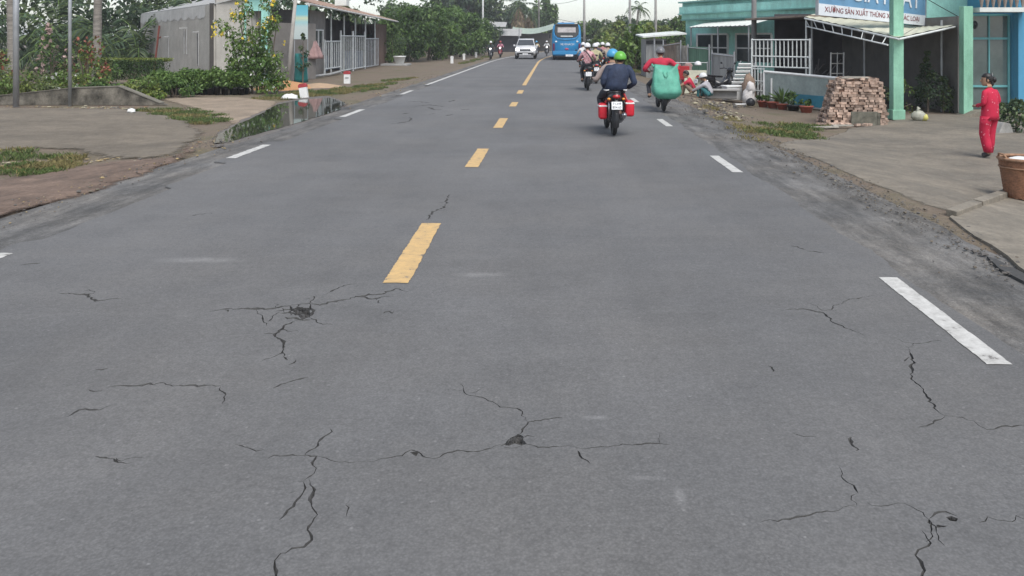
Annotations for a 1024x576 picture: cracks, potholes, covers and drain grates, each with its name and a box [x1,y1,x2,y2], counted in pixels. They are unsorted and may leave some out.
crack [797,295,873,335]
crack [902,340,1022,430]
crack [60,290,121,302]
crack [762,468,1023,576]
crack [96,456,139,464]
crack [67,368,232,417]
crack [235,429,353,576]
